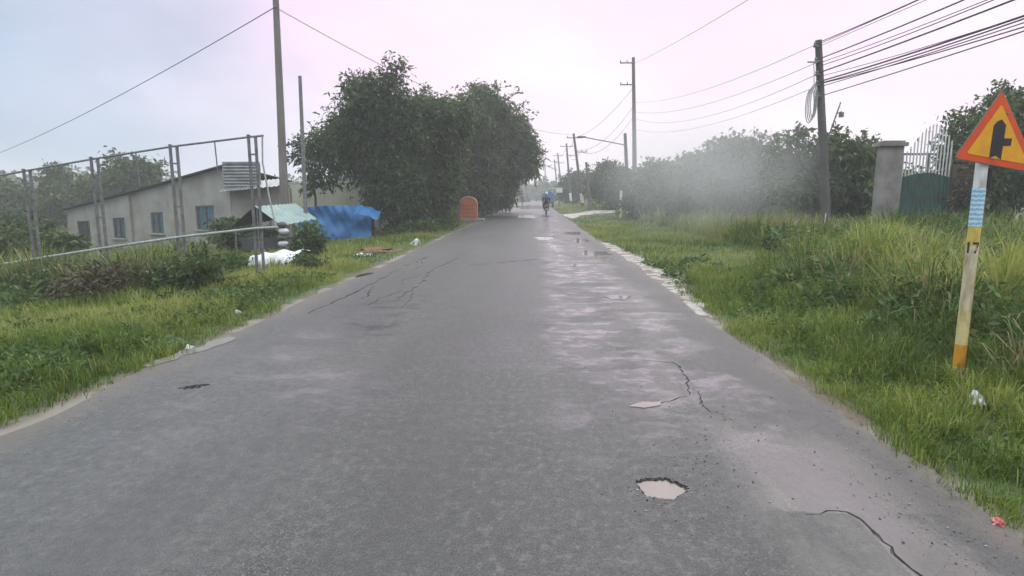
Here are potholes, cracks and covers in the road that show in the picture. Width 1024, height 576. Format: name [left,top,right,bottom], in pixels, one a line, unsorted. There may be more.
crack [307,257,458,314]
crack [635,359,710,412]
pothole [635,477,690,499]
